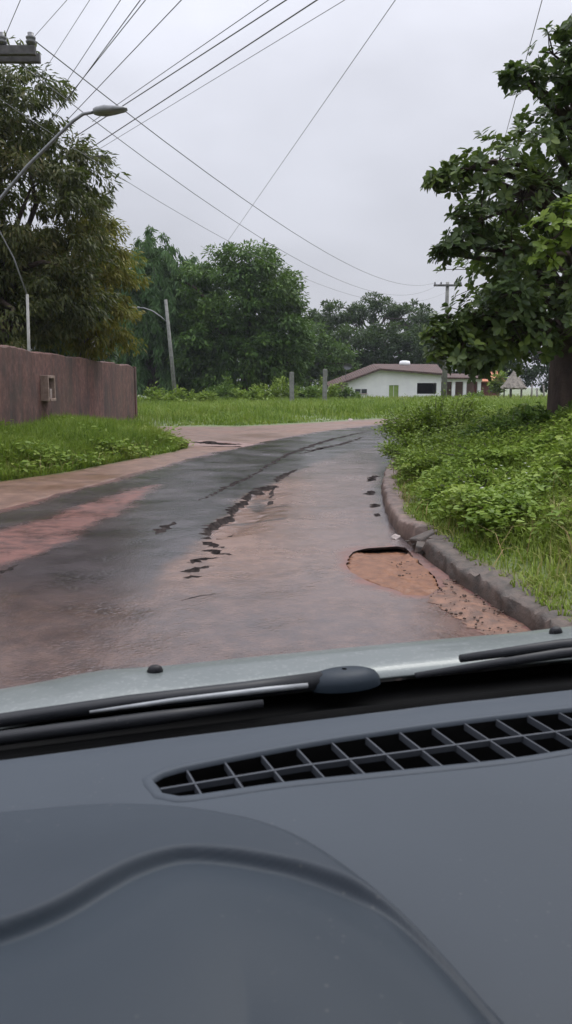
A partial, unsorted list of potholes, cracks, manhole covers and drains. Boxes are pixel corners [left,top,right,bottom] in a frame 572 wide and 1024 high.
pothole [347,546,439,596]
crack [179,542,231,601]
crack [198,431,368,501]
crack [153,522,177,534]
